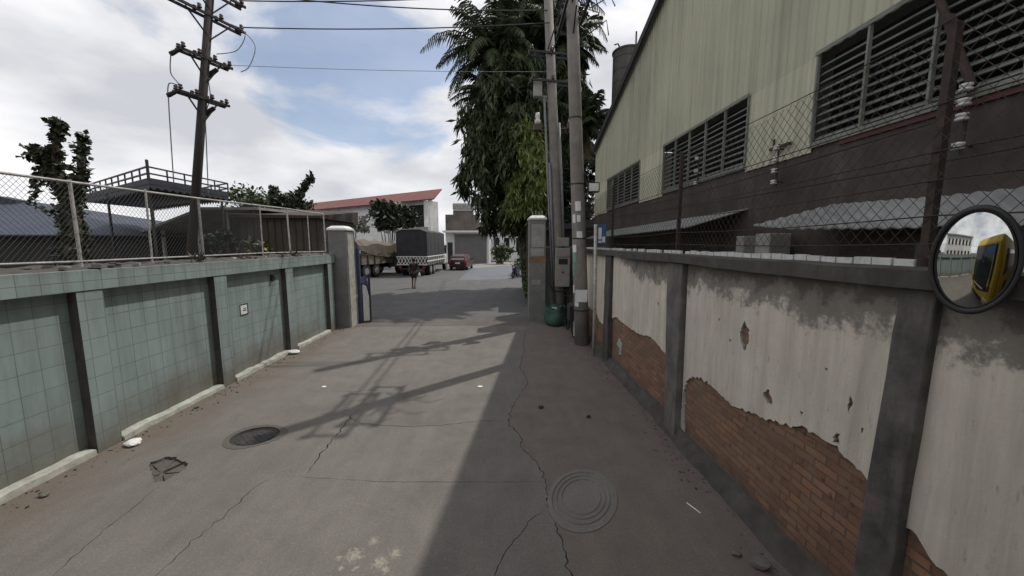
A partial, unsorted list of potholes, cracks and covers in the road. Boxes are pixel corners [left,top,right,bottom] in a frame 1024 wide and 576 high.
pothole [149,457,188,482]
manhole cover [547,469,618,533]
manhole cover [222,425,288,450]
crack [158,410,532,574]
crack [494,514,539,576]
